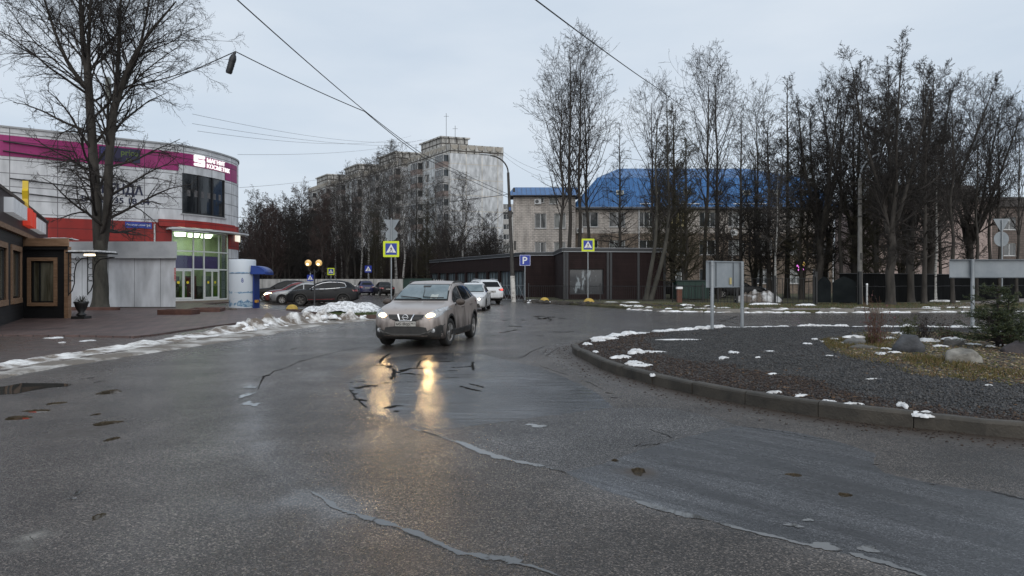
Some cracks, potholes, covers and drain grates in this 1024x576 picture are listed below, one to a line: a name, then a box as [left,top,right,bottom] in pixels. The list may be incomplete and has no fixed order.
crack [257,346,484,412]
